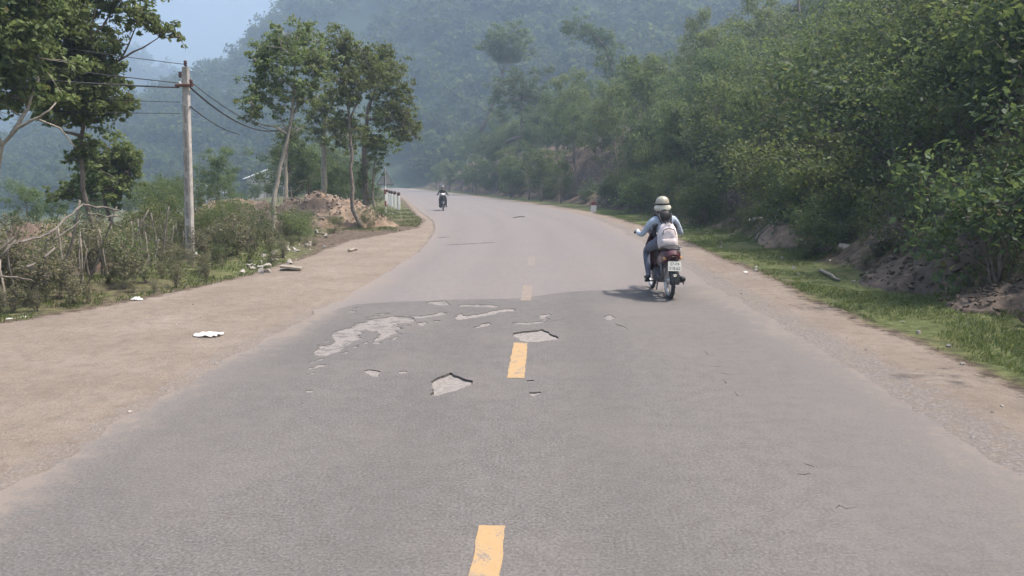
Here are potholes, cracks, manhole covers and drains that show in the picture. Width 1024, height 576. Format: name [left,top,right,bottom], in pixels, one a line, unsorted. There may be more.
pothole [313,313,441,357]
pothole [513,329,559,342]
pothole [512,314,551,325]
pothole [454,308,516,320]
pothole [430,372,473,396]
